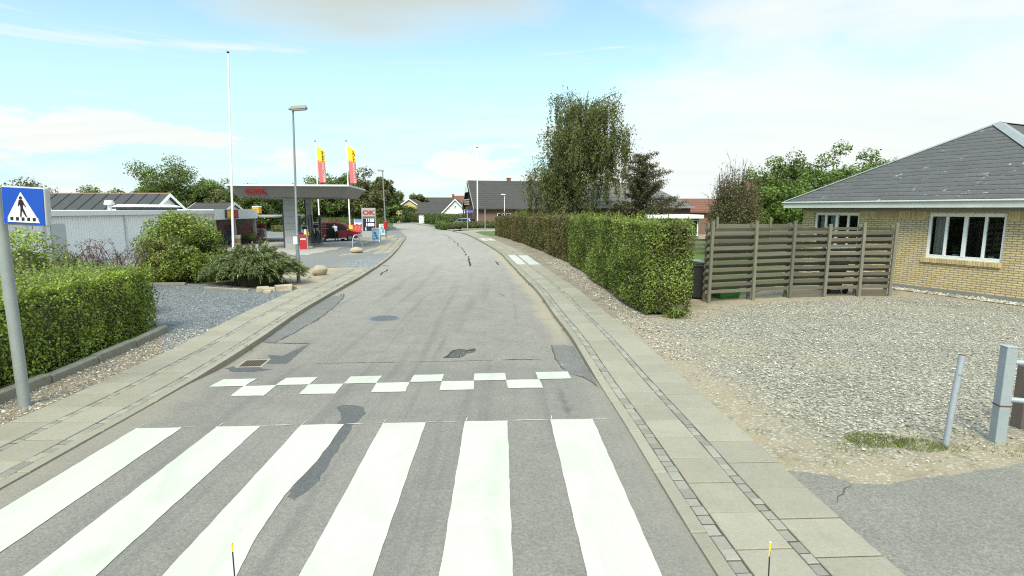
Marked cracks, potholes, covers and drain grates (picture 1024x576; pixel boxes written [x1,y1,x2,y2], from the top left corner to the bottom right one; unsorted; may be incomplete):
drain grate [235,359,271,368]
